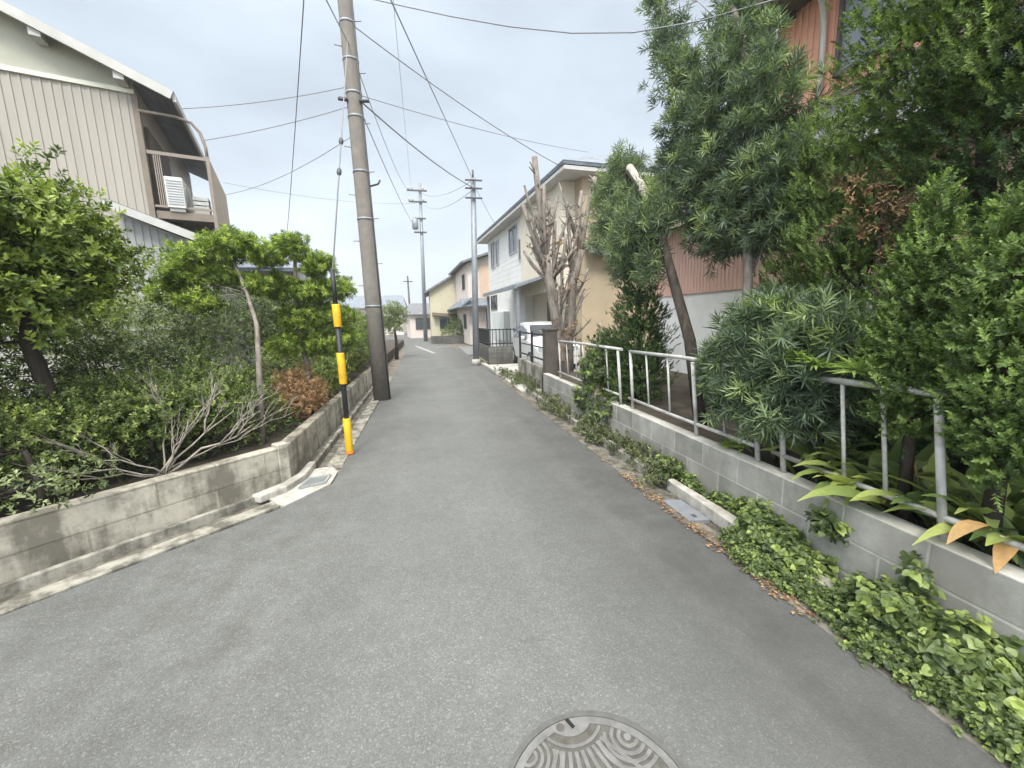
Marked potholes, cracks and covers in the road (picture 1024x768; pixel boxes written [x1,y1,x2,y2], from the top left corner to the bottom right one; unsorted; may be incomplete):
manhole cover [508,710,686,768]
